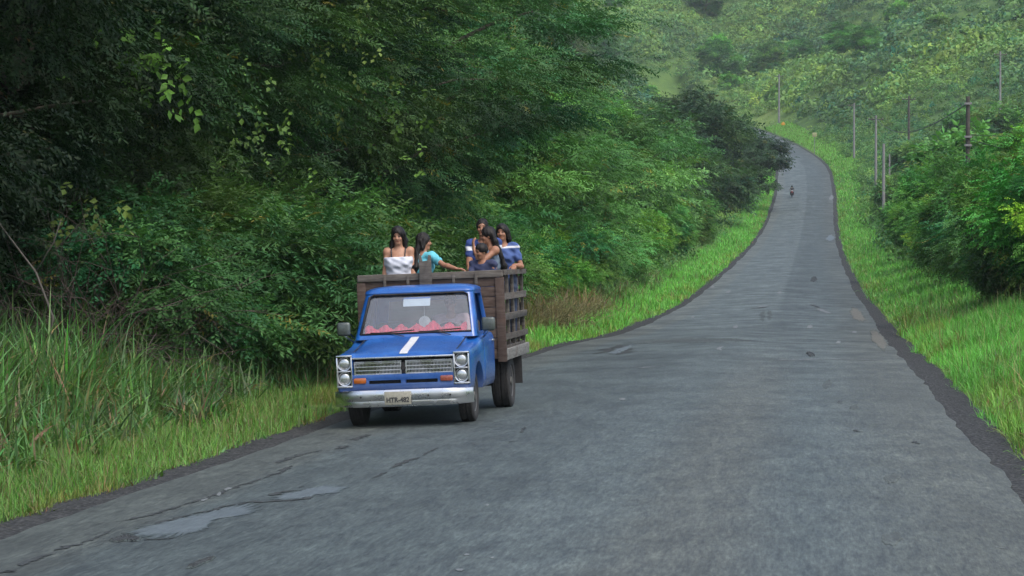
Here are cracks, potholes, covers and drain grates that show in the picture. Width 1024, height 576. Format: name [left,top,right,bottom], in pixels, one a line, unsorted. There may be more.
crack [0,434,368,573]
